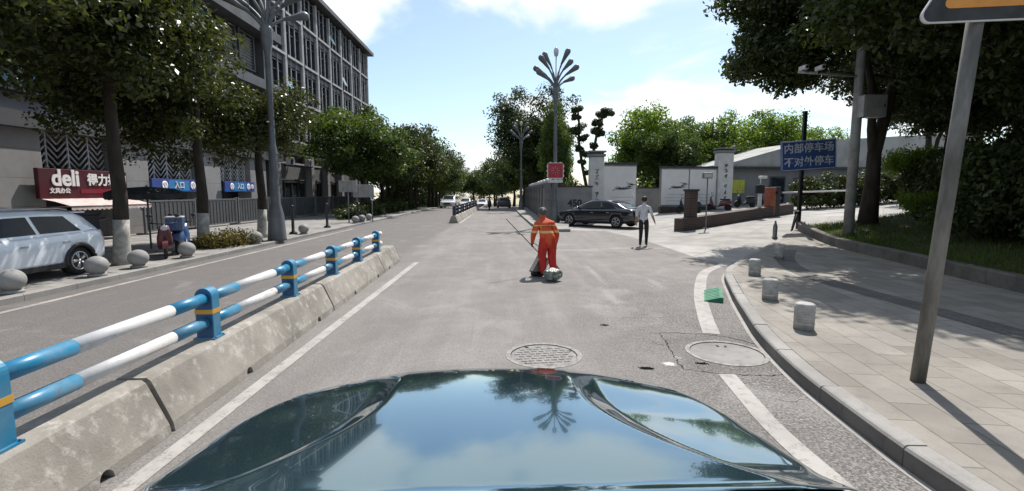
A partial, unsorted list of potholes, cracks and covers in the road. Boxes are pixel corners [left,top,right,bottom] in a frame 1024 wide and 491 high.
crack [649,332,783,376]
manhole cover [506,343,582,368]
manhole cover [685,340,770,367]
